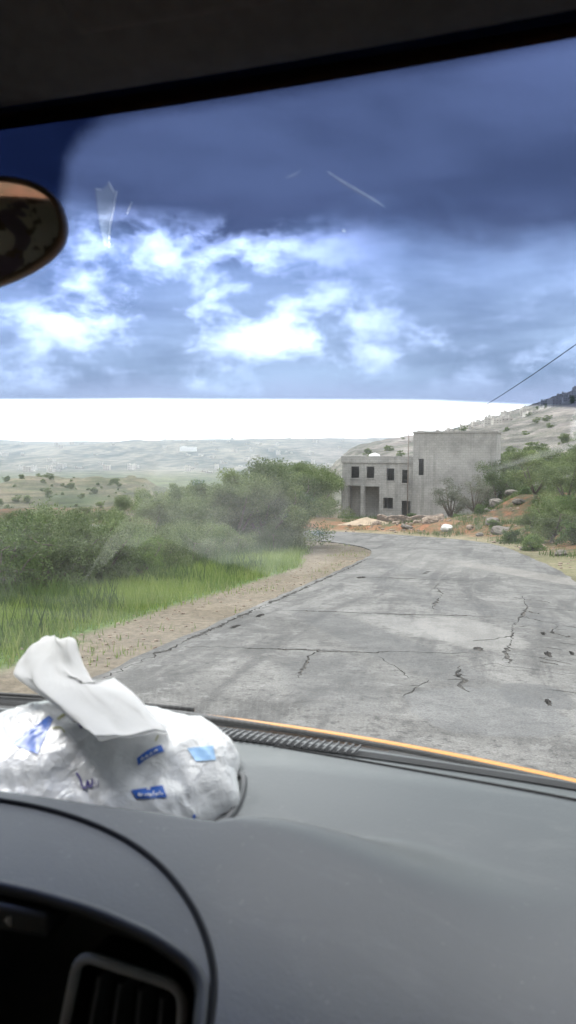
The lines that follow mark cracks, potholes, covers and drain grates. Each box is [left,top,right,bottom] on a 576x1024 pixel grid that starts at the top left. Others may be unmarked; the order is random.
crack [103,560,576,696]
